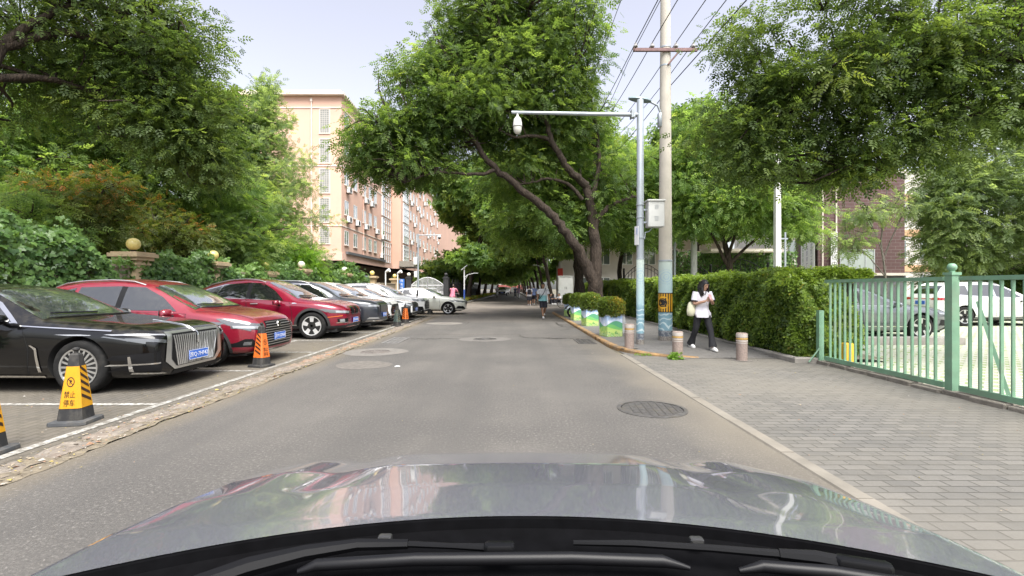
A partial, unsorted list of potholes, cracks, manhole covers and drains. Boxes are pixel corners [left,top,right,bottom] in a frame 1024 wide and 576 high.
manhole cover [617,401,688,418]
manhole cover [343,348,408,356]
